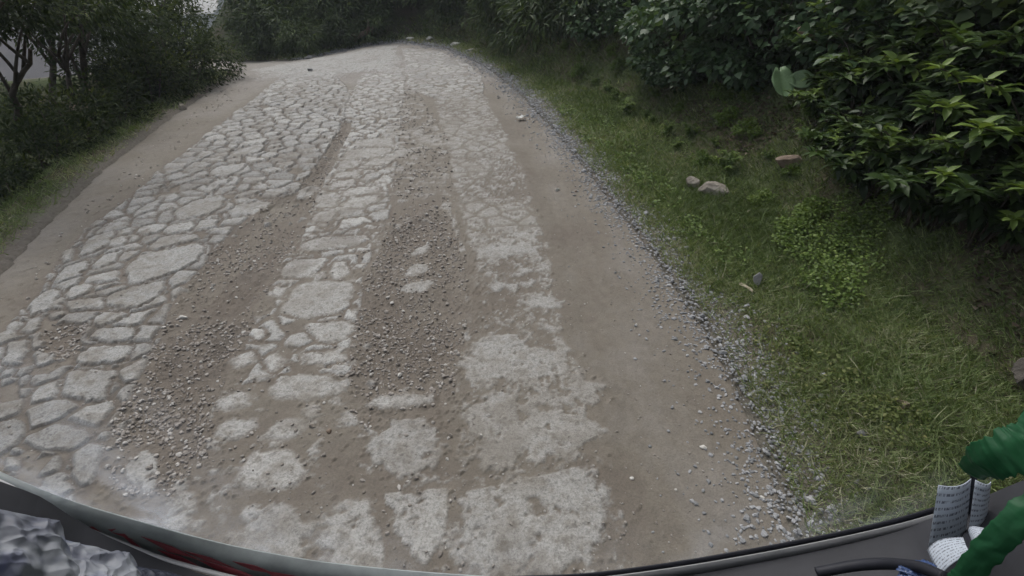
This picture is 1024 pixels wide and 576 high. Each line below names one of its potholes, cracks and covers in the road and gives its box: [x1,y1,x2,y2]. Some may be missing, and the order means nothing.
crack [0,49,631,575]
pothole [105,120,353,496]
